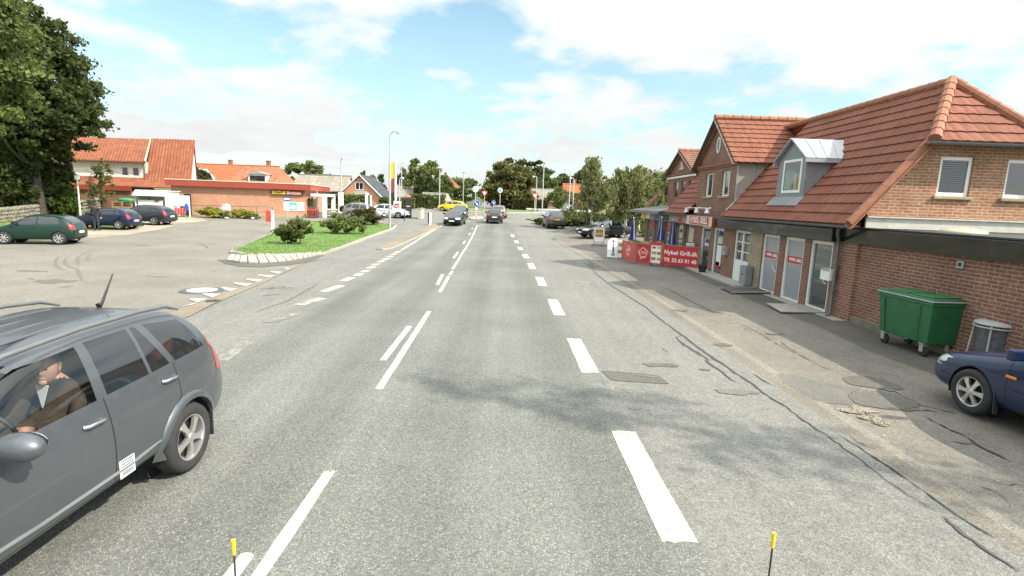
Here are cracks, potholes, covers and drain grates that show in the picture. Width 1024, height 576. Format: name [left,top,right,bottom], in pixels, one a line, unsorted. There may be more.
crack [907,397,1013,462]
crack [840,435,1022,557]
crack [617,267,834,371]
pothole [834,406,880,415]
